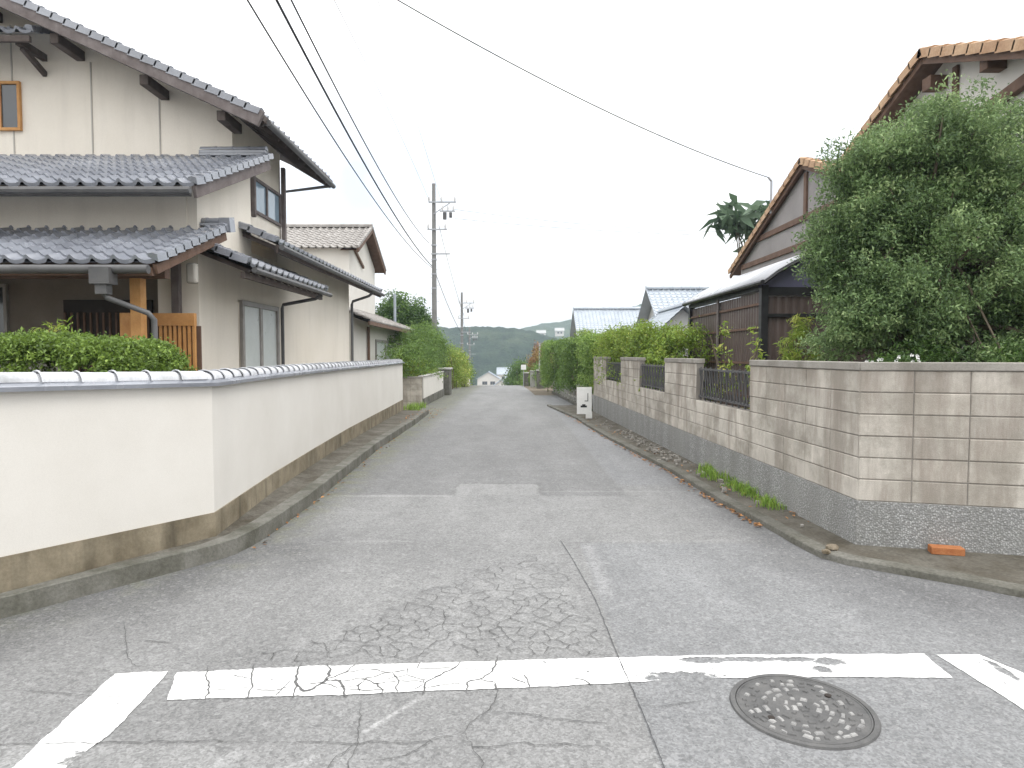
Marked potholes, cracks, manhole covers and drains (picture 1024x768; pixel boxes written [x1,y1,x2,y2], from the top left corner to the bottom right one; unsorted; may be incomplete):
manhole cover [729,674,881,750]
crack [205,540,704,768]
